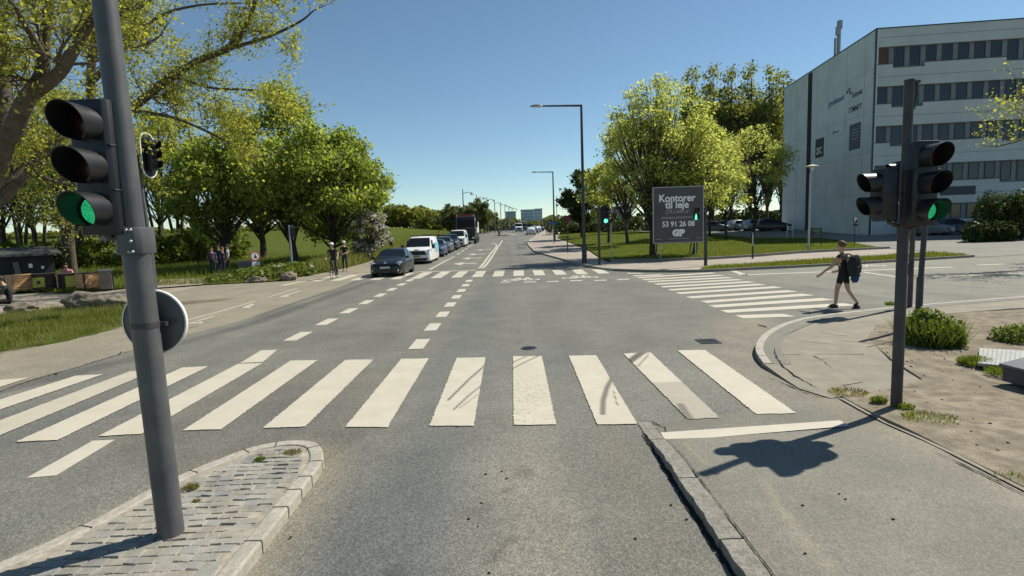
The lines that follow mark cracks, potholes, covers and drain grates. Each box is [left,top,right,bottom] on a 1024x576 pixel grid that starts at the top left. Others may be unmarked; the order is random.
crack [771,349,831,398]
